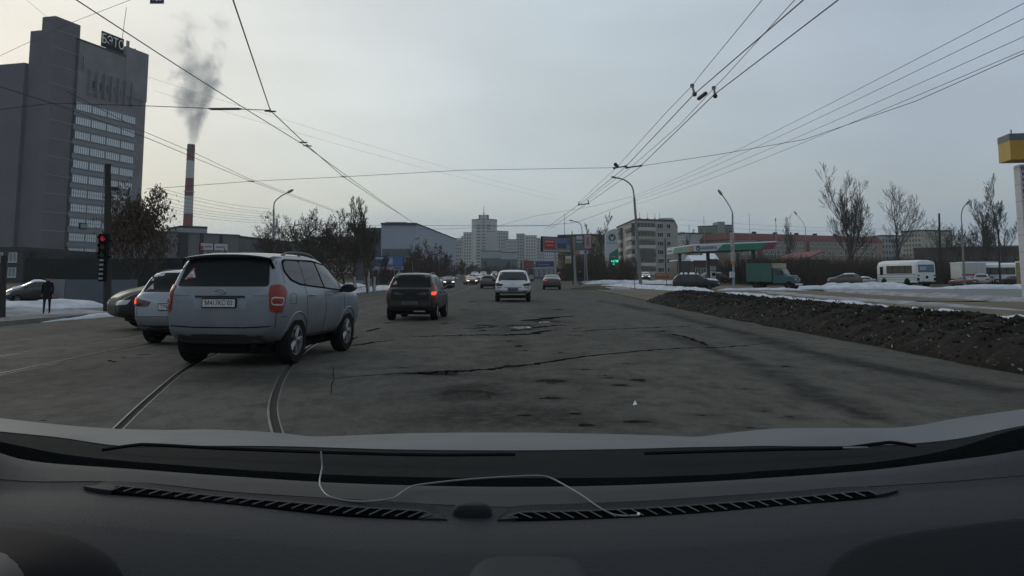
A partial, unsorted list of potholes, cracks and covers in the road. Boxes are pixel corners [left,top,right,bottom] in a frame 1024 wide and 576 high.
crack [331,301,766,395]
